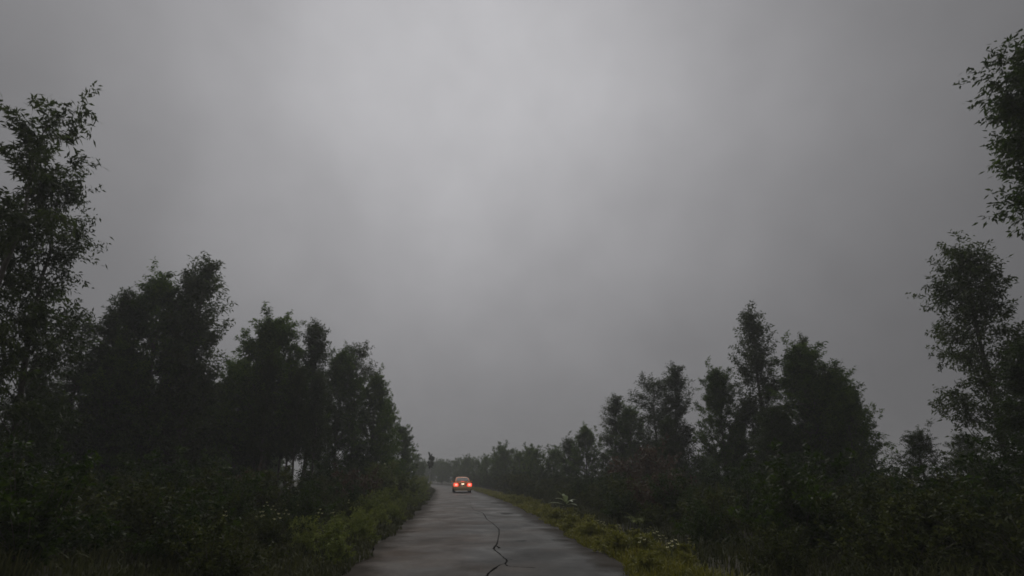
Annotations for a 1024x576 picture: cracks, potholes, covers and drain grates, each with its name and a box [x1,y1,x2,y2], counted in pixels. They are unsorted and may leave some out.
crack [473,509,534,576]
